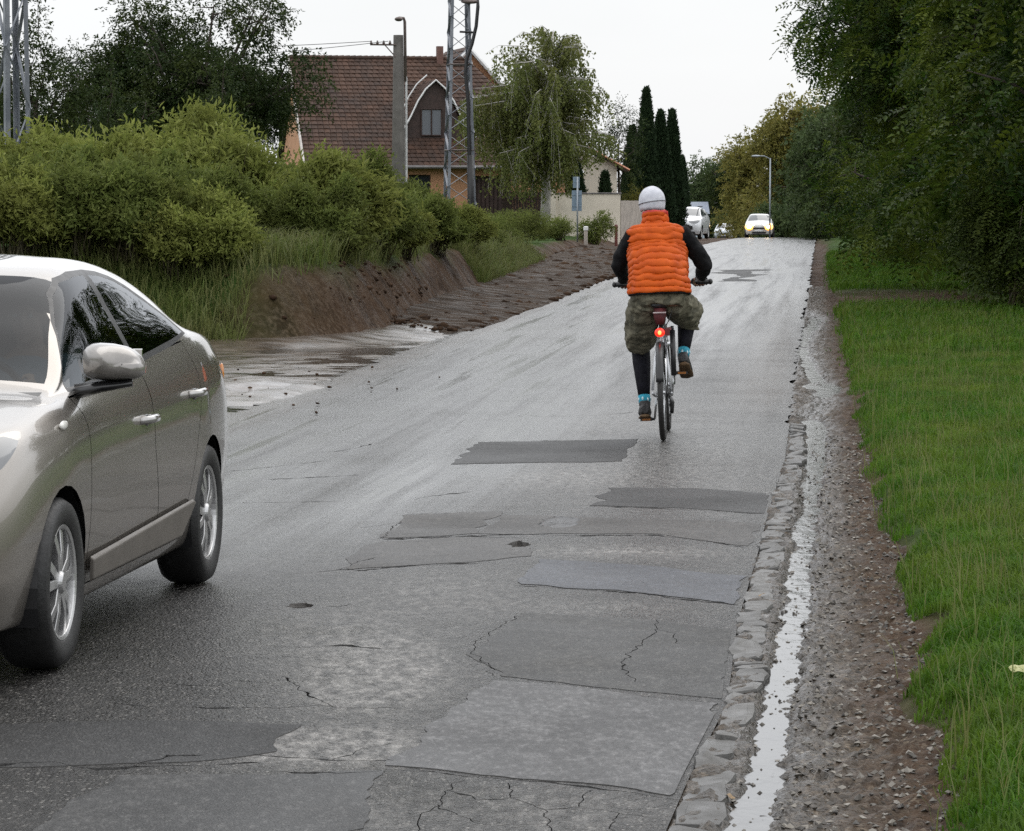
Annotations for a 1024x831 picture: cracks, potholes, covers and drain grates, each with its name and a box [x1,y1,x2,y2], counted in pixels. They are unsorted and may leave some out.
crack [621,621,678,682]
crack [198,676,408,709]
crack [417,780,650,831]
